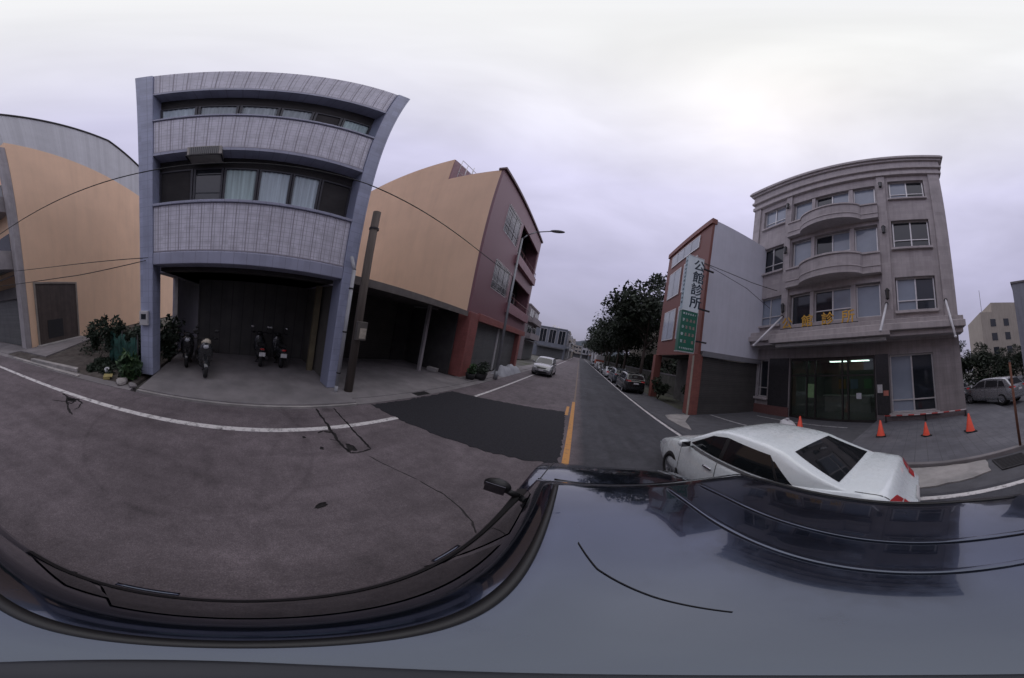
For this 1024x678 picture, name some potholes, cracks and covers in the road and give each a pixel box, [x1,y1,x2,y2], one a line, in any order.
drain grate [992,452,1024,470]
crack [315,408,477,533]
crack [54,394,83,415]
